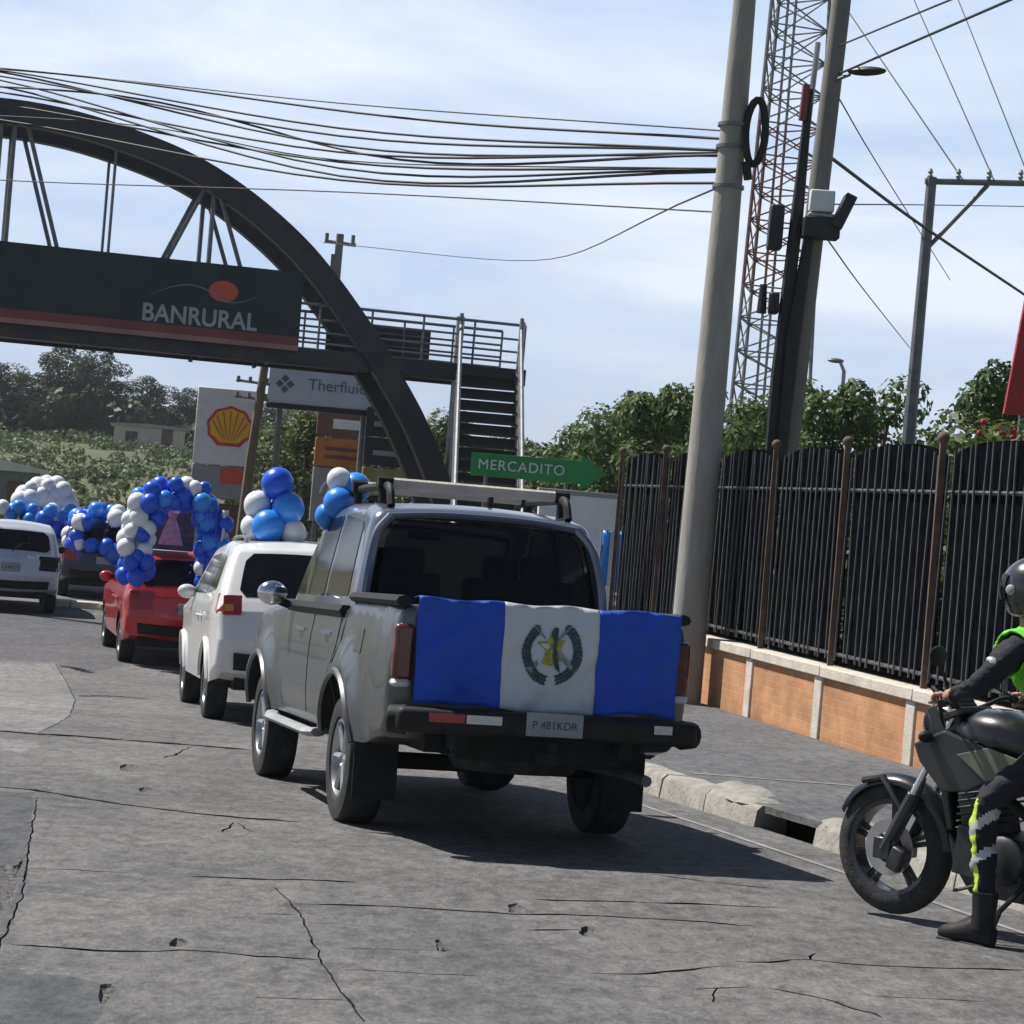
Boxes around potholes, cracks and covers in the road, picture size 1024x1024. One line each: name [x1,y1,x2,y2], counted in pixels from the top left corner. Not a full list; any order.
pothole [508,903,526,915]
pothole [98,984,115,1004]
crack [0,665,248,758]
pothole [579,926,596,936]
drain grate [755,803,876,844]
pothole [120,764,139,772]
crack [751,953,1015,970]
crack [597,966,740,1002]
pothole [169,938,188,947]
crack [0,800,321,963]
